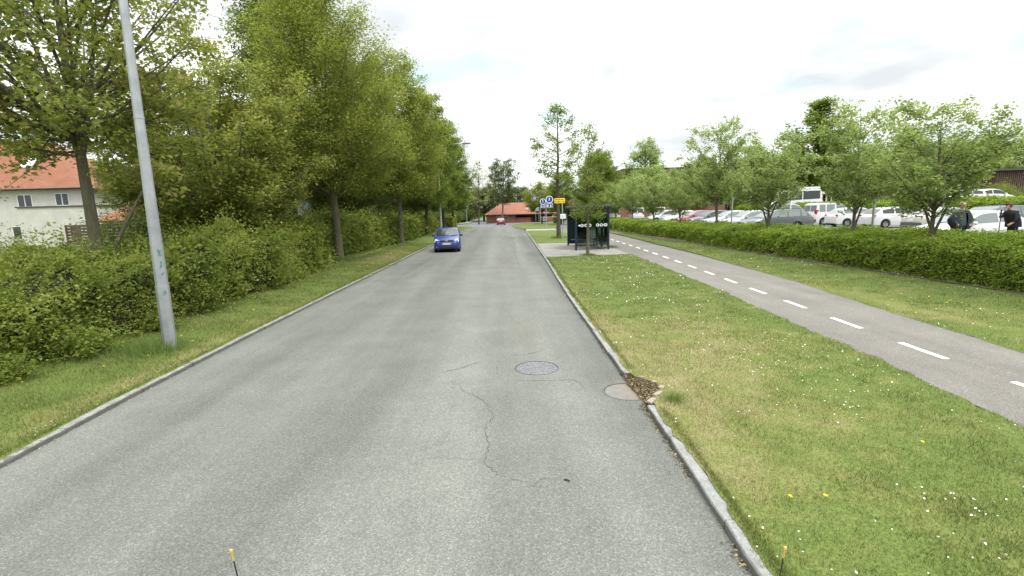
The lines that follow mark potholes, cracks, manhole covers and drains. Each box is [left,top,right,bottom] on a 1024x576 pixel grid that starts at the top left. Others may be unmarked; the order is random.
manhole cover [515,361,559,375]
manhole cover [603,383,642,401]
crack [442,363,552,487]
